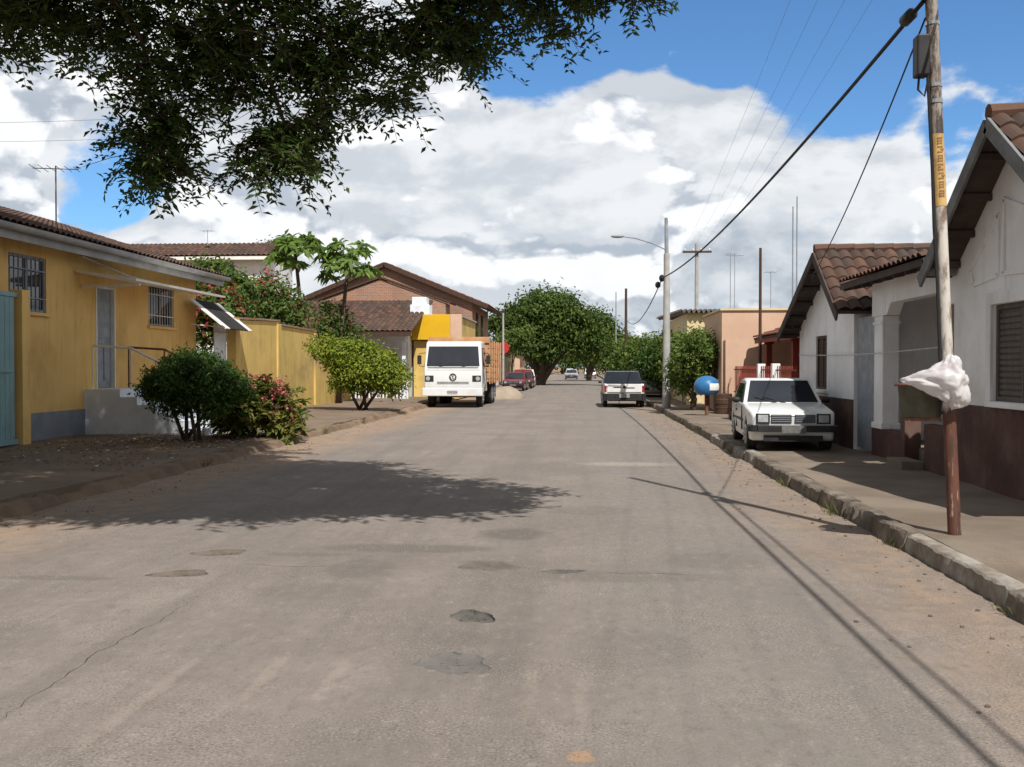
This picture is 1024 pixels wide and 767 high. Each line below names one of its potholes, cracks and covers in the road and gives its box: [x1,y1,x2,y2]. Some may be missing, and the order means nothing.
pothole [450,609,495,623]
crack [6,608,178,716]
